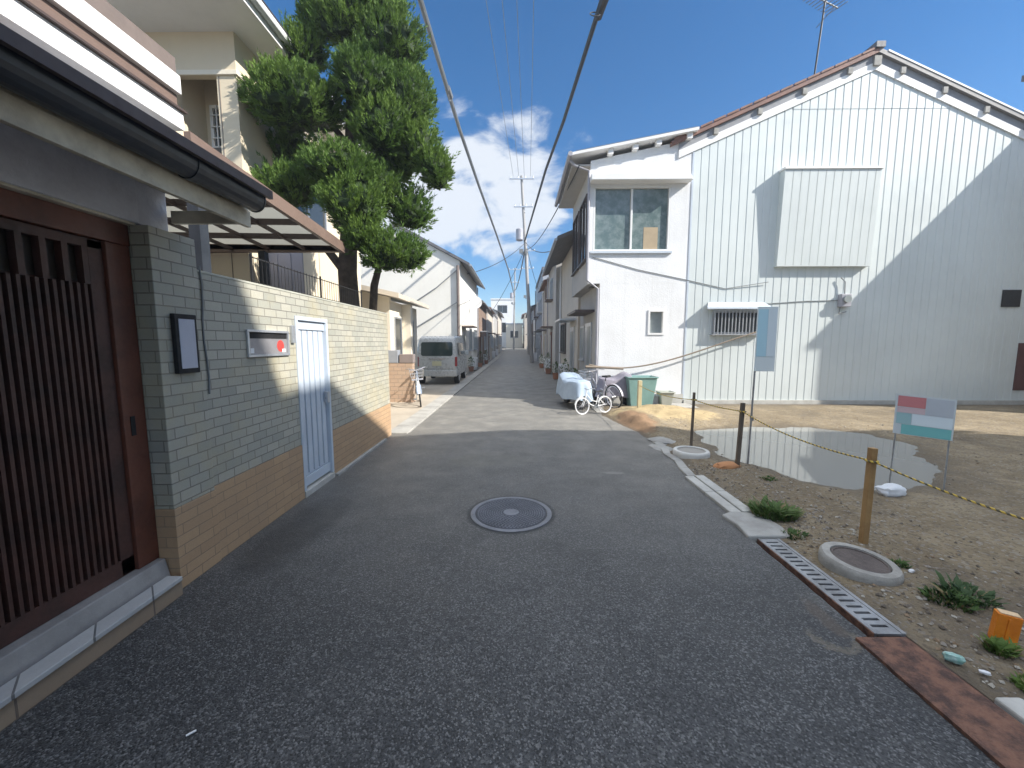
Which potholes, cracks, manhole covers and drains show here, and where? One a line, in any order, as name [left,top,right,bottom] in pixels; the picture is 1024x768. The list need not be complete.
manhole cover [471,497,552,532]
drain grate [757,539,906,637]
manhole cover [818,542,904,586]
manhole cover [673,446,710,459]
